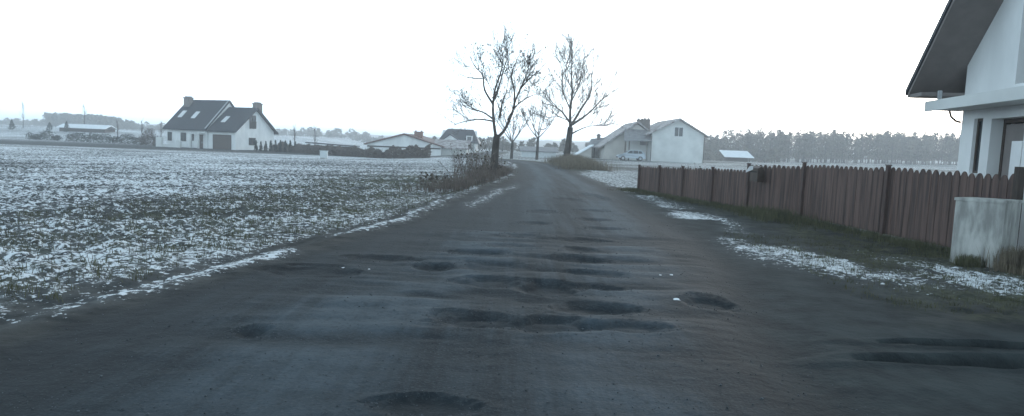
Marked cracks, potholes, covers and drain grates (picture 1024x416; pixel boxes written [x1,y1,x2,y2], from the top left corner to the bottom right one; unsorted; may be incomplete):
pothole [674,291,744,313]
pothole [409,262,460,272]
pothole [445,275,590,298]
pothole [231,324,277,340]
pothole [337,254,428,264]
pothole [543,253,615,264]
pothole [568,282,634,291]
pothole [417,308,605,334]
pothole [577,318,682,334]
pothole [356,391,487,416]
pothole [545,301,647,316]
